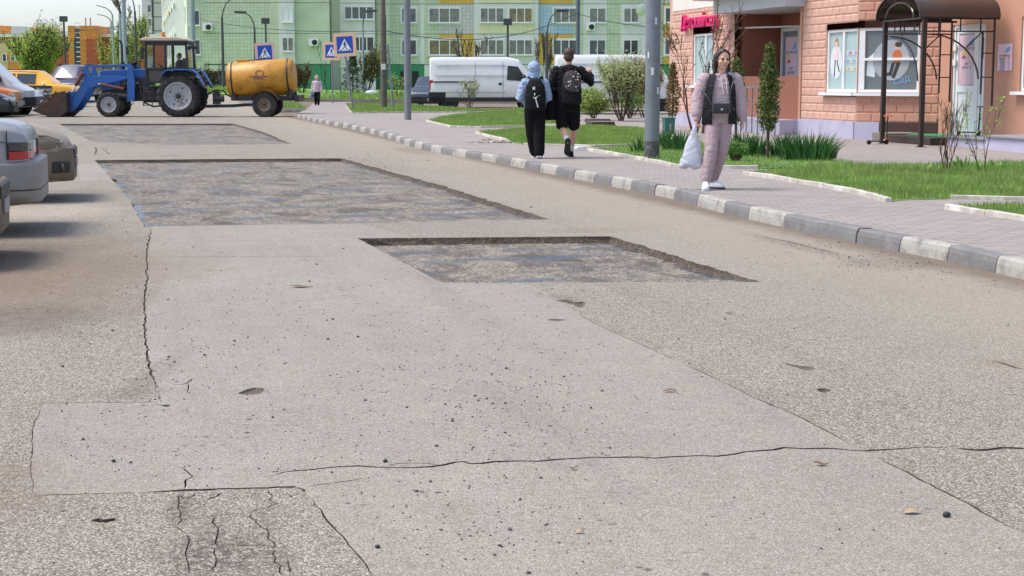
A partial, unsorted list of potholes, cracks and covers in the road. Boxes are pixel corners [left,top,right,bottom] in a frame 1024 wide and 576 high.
crack [176,447,1024,576]
